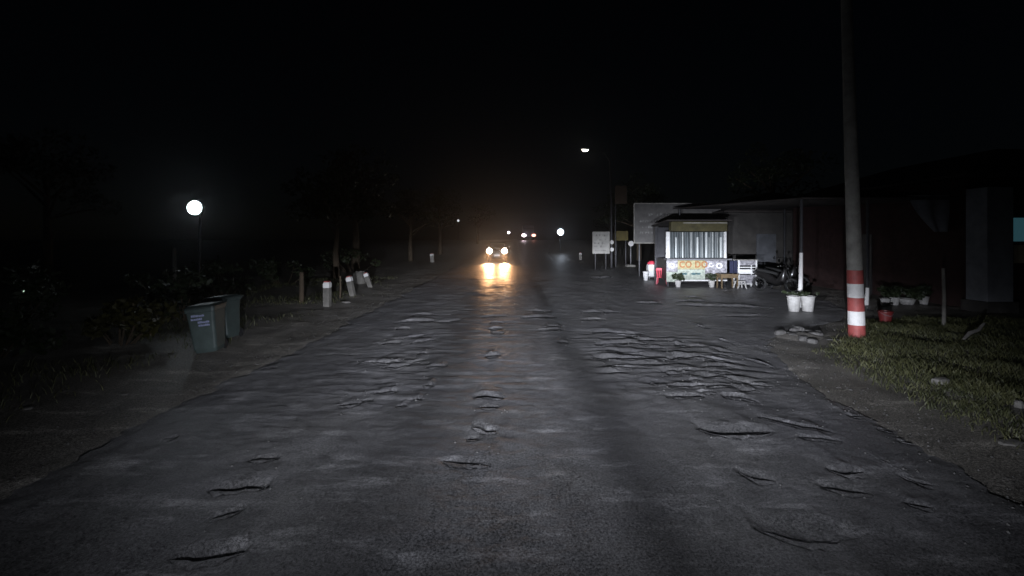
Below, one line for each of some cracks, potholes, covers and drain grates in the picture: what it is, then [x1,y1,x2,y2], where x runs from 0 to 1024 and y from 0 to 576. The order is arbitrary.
pothole [822,479,872,498]
pothole [472,418,498,435]
pothole [474,390,503,401]
pothole [442,454,490,470]
pothole [825,461,866,479]
pothole [736,465,776,485]
pothole [170,529,249,571]
pothole [697,419,774,440]
pothole [749,509,864,552]
pothole [209,472,271,497]
pothole [904,498,935,513]
